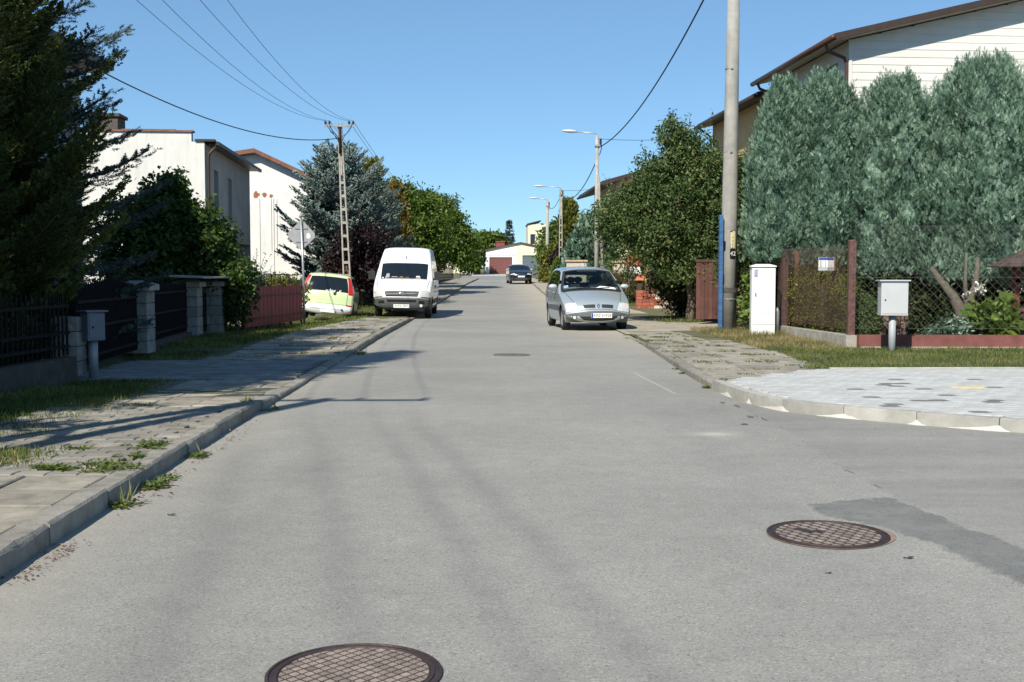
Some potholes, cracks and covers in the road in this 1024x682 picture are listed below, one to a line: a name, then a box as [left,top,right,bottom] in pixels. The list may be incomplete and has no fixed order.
manhole cover [264,643,443,682]
manhole cover [767,520,891,549]
